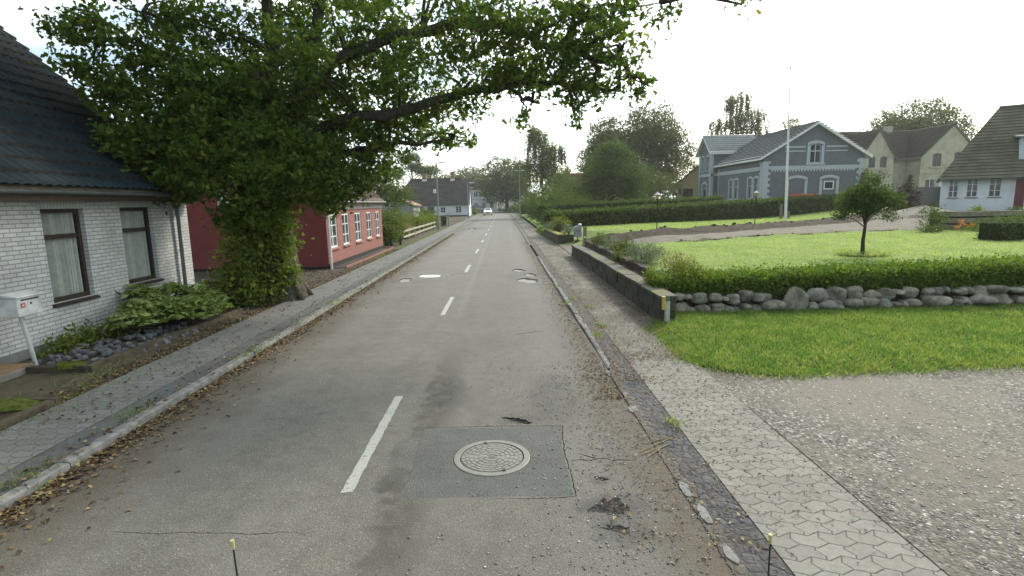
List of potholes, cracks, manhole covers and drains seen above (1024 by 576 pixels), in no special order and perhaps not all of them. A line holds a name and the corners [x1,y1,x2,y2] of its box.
pothole [585,495,630,515]
manhole cover [454,440,530,477]
pothole [600,525,631,536]
